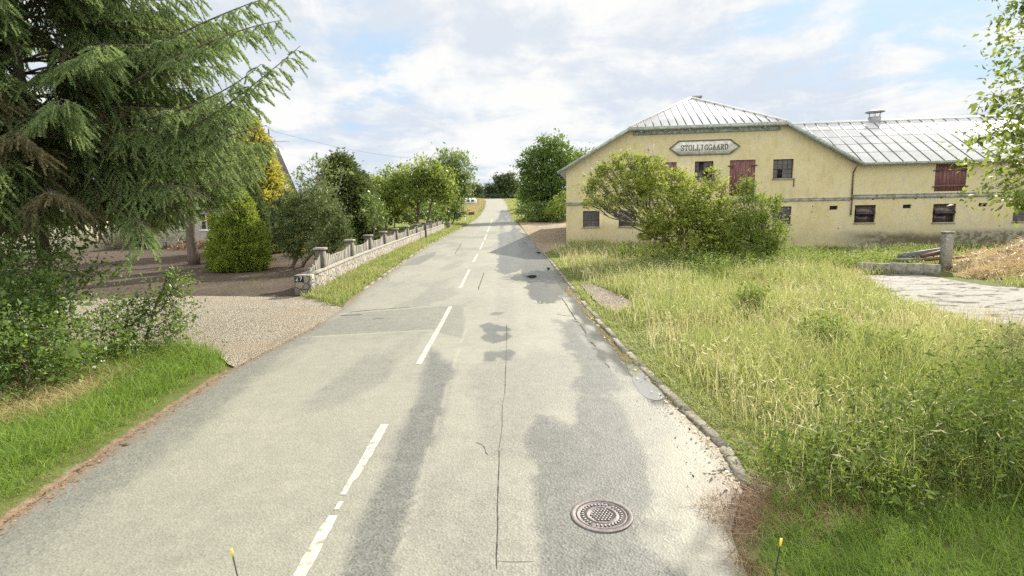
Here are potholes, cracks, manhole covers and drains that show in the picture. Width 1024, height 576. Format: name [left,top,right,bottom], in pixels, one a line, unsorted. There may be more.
crack [476,325,533,567]
manhole cover [570,499,633,533]
